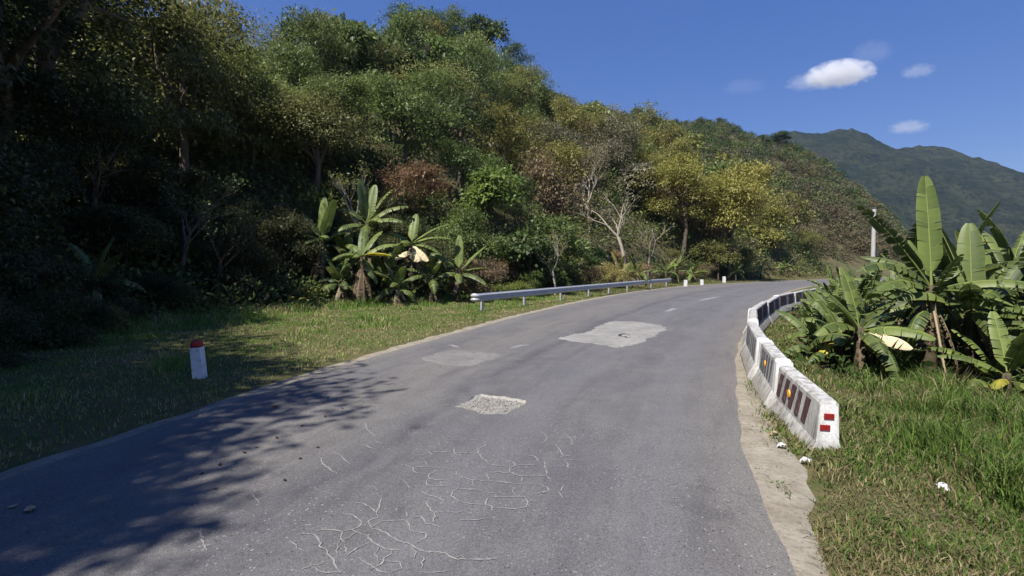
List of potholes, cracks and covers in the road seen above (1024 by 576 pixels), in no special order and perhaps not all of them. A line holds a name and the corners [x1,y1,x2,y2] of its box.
pothole [454,394,526,414]
crack [291,430,577,573]
